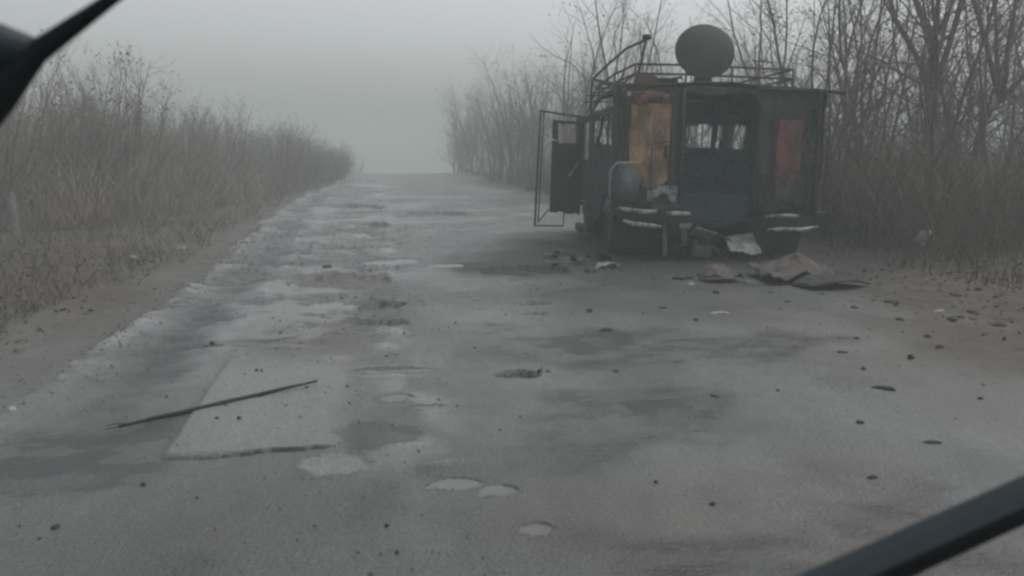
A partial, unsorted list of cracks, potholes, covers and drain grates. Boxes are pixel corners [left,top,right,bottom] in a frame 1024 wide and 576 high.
pothole [492,368,543,379]
pothole [517,520,556,537]
pothole [477,483,521,498]
pothole [375,392,419,402]
pothole [422,476,486,491]
